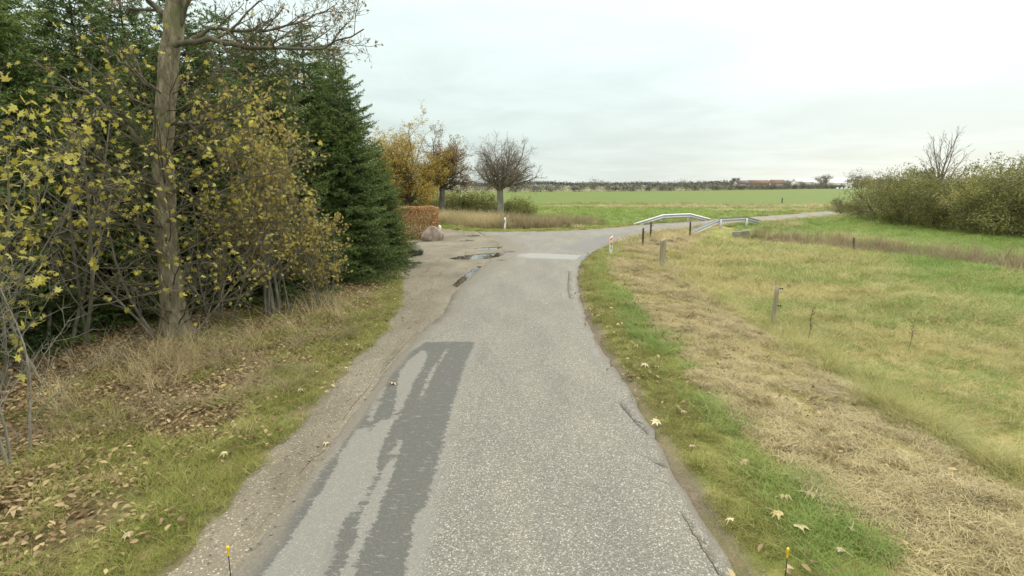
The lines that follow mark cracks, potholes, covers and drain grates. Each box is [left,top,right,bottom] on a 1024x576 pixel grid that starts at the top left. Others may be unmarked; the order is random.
crack [682,515,719,575]
pothole [451,266,482,287]
